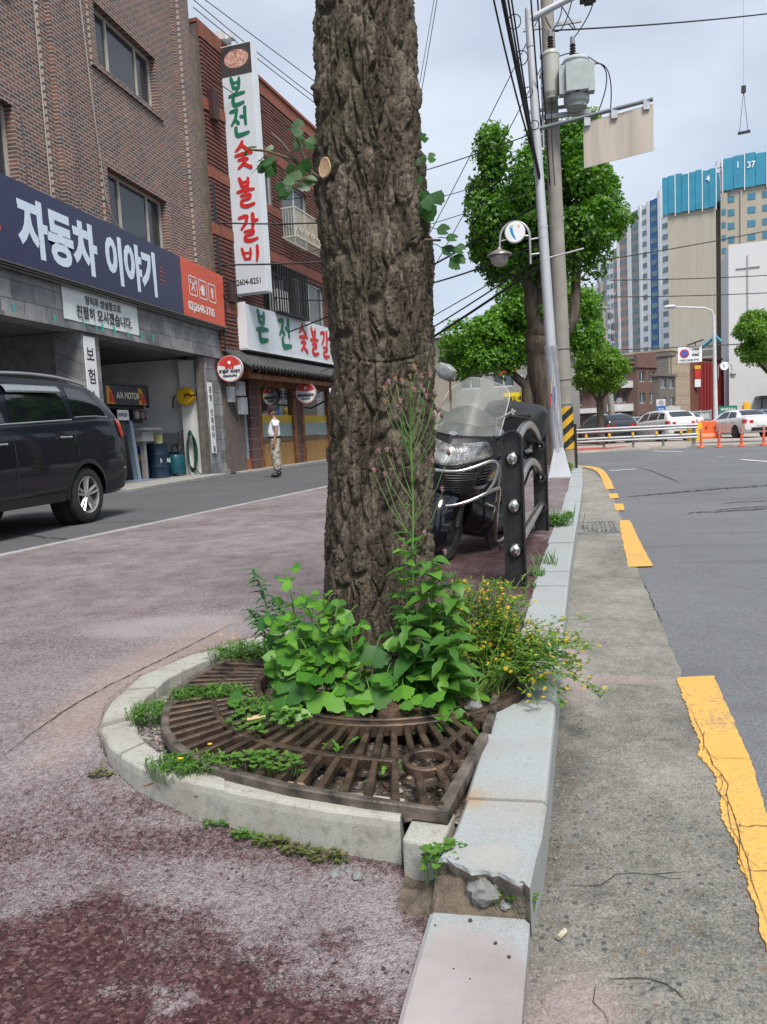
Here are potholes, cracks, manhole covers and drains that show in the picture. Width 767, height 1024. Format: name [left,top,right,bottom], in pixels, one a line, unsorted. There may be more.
crack [570,872,683,886]
drain grate [578,521,620,534]
crack [593,977,686,1024]
